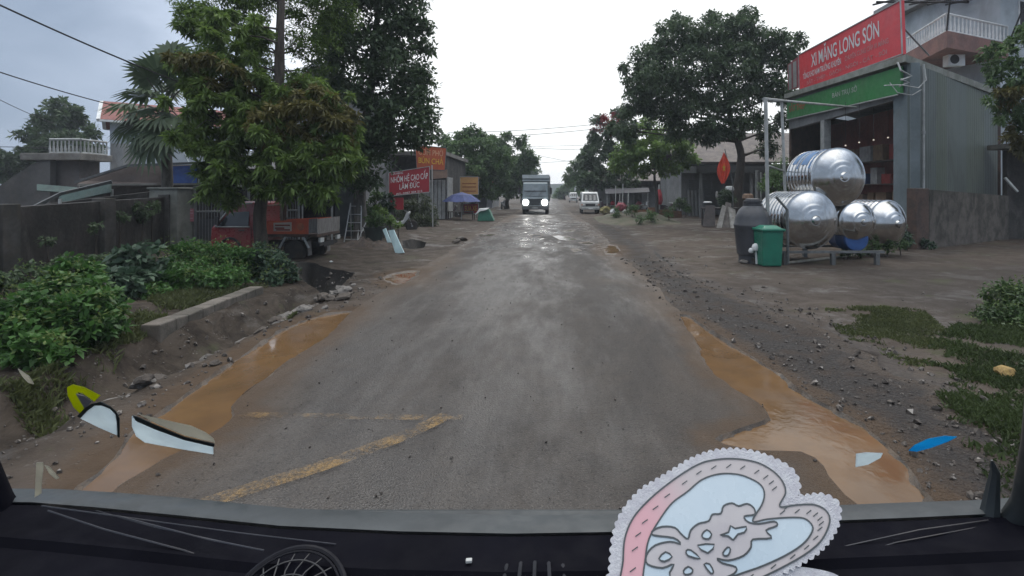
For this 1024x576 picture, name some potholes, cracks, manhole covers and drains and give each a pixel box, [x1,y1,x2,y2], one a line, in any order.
pothole [383,270,420,285]
pothole [74,311,352,492]
pothole [602,244,621,255]
pothole [680,314,934,504]
